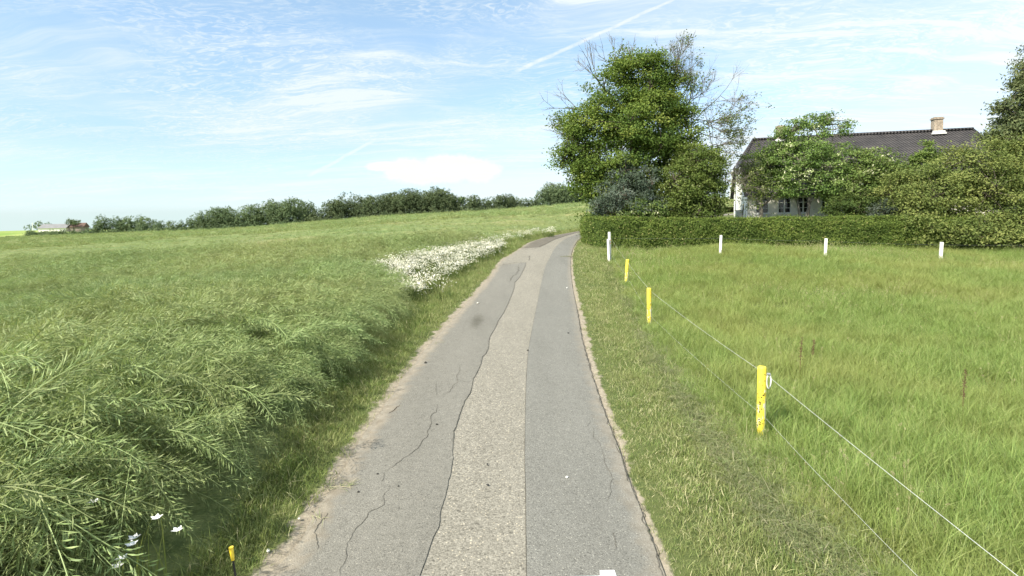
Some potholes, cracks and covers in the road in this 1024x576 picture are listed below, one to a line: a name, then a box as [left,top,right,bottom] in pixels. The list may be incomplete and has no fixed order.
crack [339,410,437,571]
